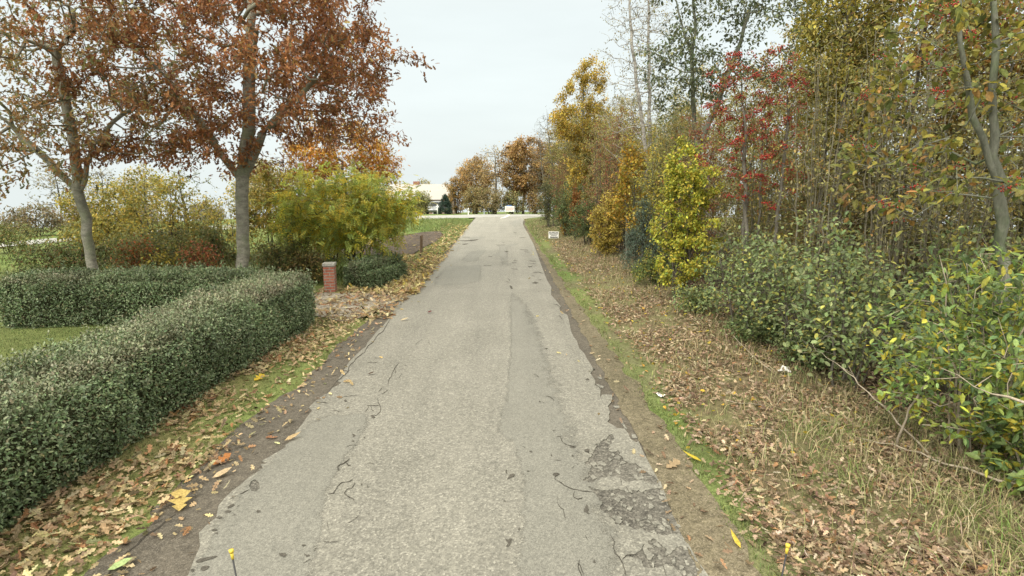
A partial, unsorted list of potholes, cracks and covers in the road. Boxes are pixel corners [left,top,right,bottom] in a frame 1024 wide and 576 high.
pothole [589,487,686,542]
crack [316,320,431,523]
crack [555,466,595,516]
